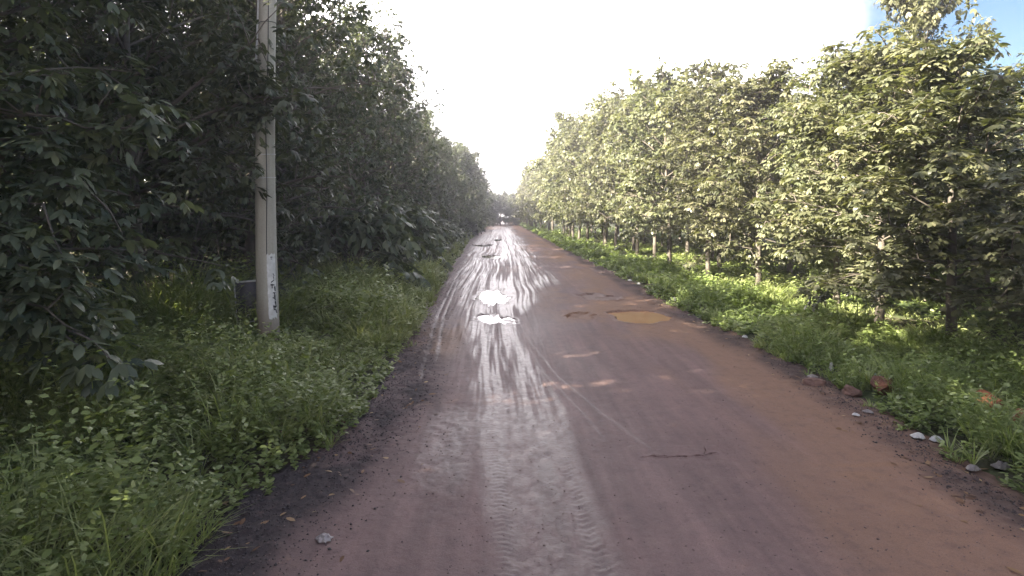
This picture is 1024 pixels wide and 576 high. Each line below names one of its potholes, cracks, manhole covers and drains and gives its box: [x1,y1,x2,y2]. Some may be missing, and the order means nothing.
pothole [560,311,602,320]
pothole [469,289,517,308]
pothole [603,309,678,325]
crack [629,445,730,461]
pothole [571,292,627,301]
pothole [469,312,523,326]
